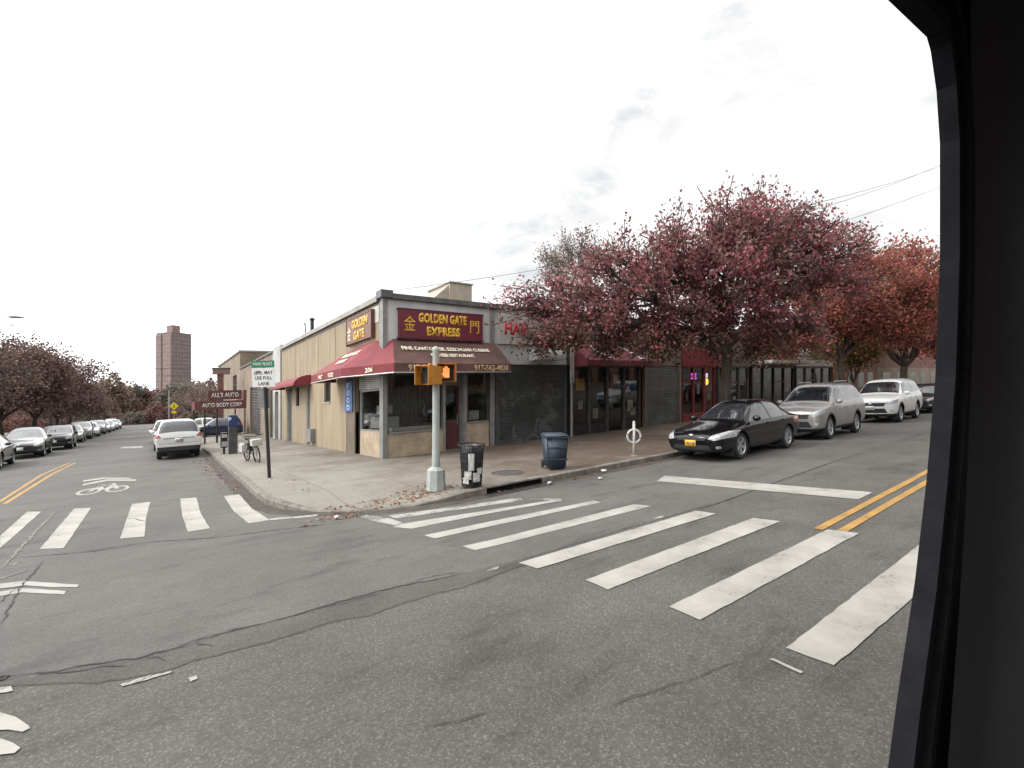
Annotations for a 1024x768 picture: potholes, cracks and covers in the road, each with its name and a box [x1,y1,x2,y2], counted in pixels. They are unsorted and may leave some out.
crack [3,572,464,676]
crack [611,660,736,707]
drain grate [482,476,555,497]
crack [0,507,345,622]
